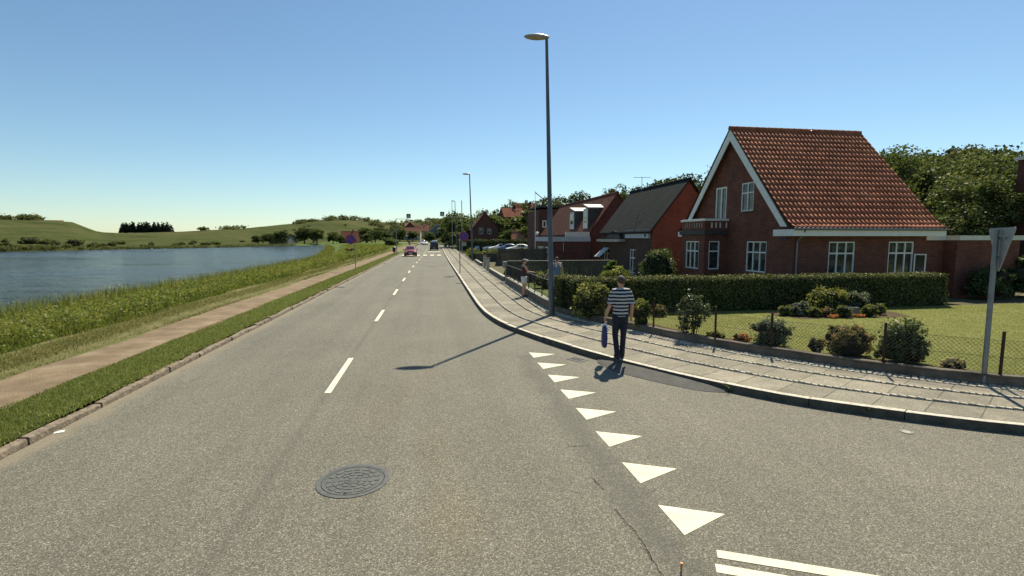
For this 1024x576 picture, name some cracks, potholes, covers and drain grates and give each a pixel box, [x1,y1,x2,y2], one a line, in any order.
crack [614,509,665,576]
manhole cover [315,464,390,499]
